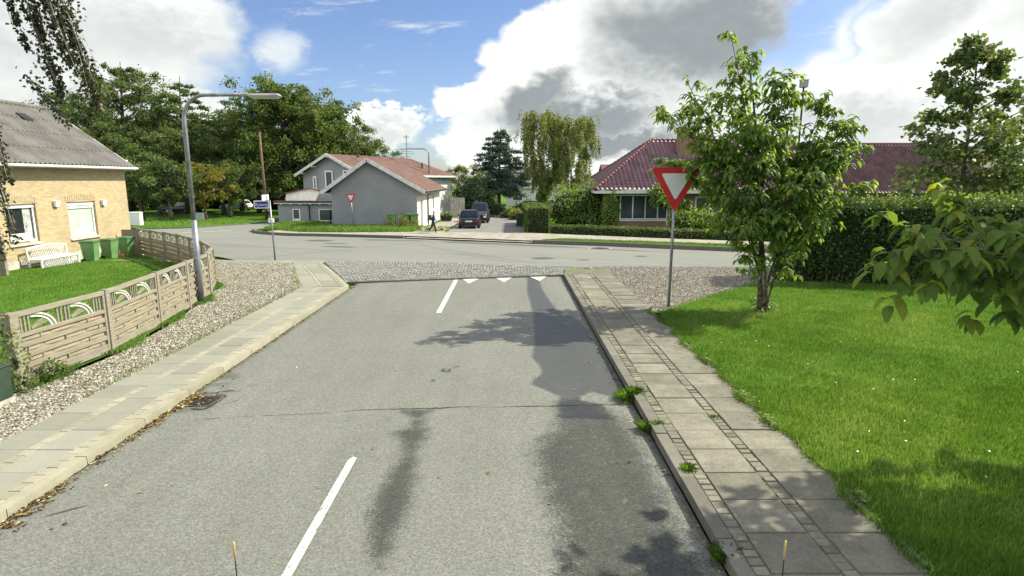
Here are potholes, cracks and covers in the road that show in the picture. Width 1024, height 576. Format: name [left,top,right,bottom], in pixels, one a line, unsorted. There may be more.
drain grate [181,396,222,407]
